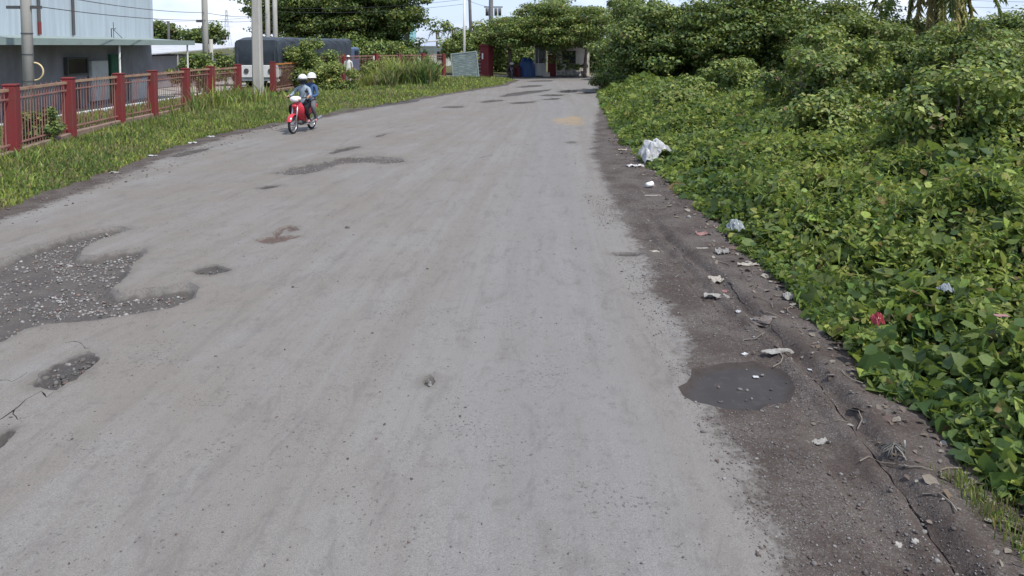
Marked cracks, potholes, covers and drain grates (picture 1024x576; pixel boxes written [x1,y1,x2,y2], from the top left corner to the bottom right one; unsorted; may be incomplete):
crack [0,372,58,420]
pothole [0,226,200,343]
pothole [27,351,100,390]
pothole [328,146,362,154]
pothole [0,426,21,448]
pothole [498,89,552,97]
pothole [678,361,796,410]
pothole [266,156,405,175]
pothole [191,264,232,276]
